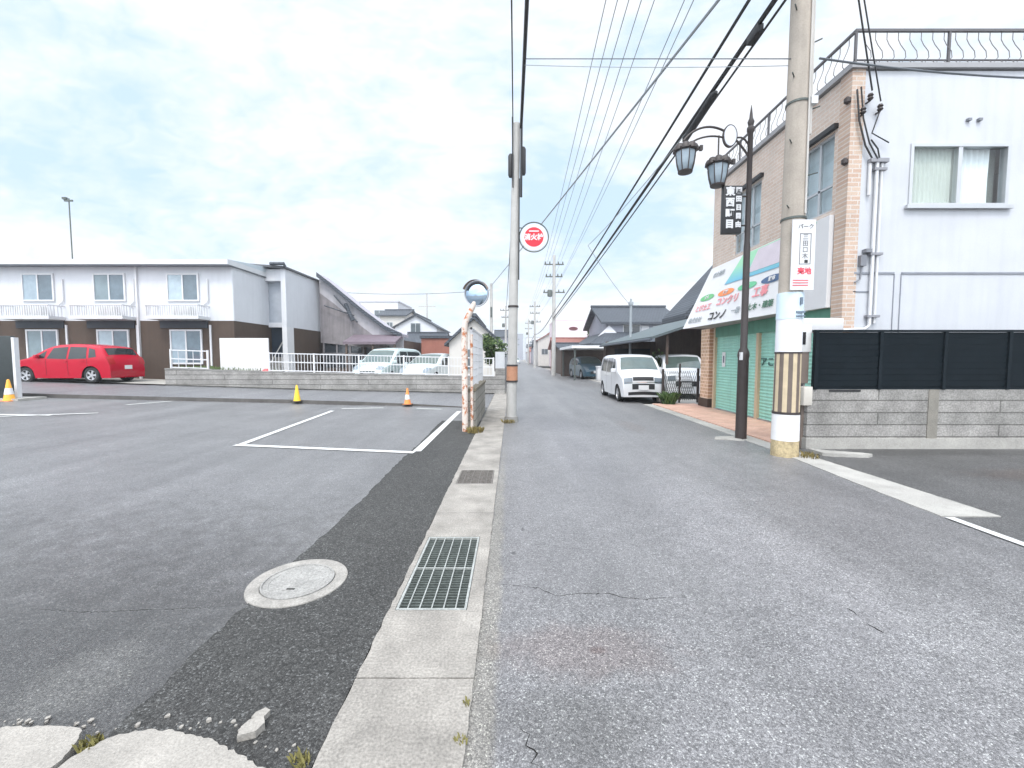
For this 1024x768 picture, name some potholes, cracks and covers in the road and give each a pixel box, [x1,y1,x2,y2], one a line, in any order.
drain grate [395,537,480,610]
crack [503,584,683,600]
crack [518,727,543,768]
manhole cover [244,559,348,608]
drain grate [456,470,494,484]
